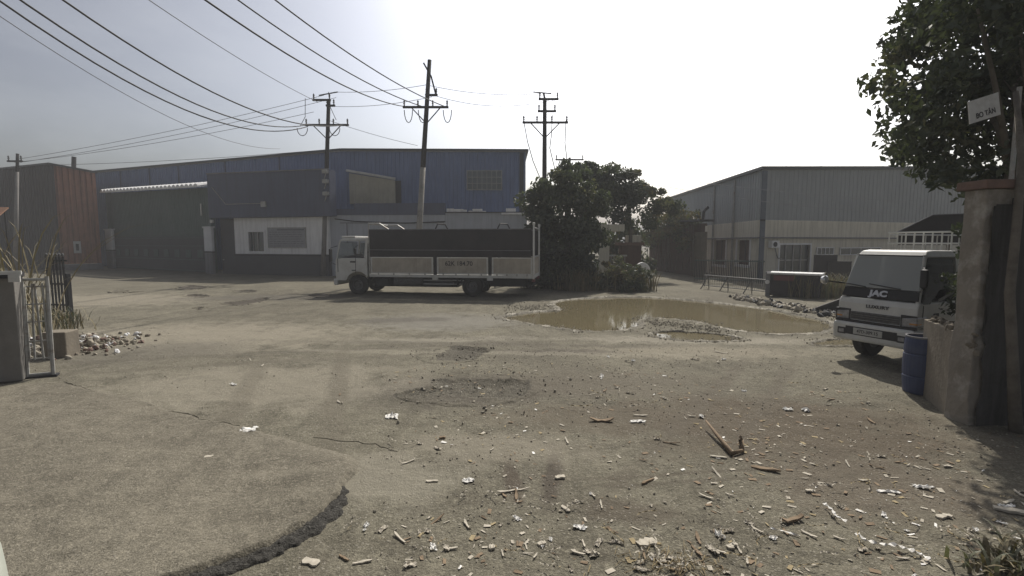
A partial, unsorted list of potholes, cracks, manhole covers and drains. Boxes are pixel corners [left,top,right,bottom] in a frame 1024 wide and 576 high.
pothole [415,345,493,364]
pothole [648,329,747,343]
pothole [496,296,834,336]
crack [188,486,350,576]
pothole [393,374,543,407]
crack [313,437,398,452]
